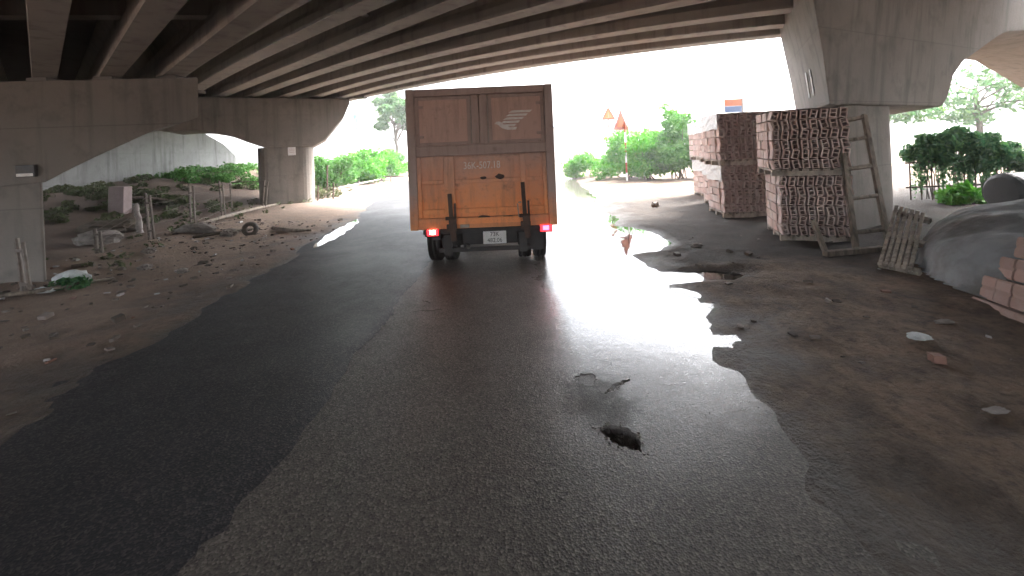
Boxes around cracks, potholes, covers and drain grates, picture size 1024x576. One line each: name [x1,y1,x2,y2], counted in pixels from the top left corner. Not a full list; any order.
pothole [589,422,649,455]
pothole [573,373,597,385]
